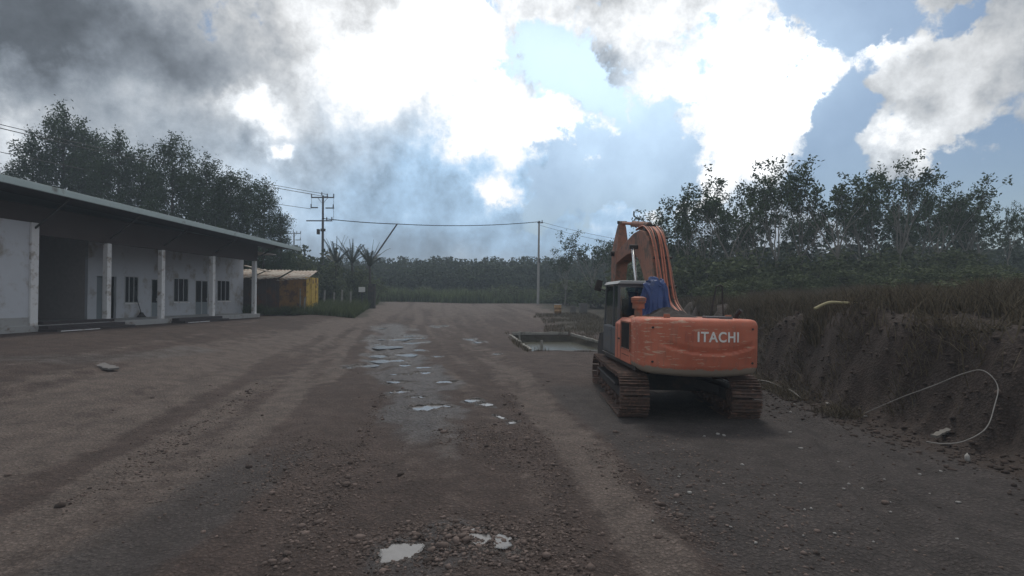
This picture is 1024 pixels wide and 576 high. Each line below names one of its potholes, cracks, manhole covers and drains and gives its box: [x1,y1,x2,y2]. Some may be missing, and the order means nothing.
pothole [367,344,409,352]
pothole [401,403,457,412]
pothole [371,538,433,569]
